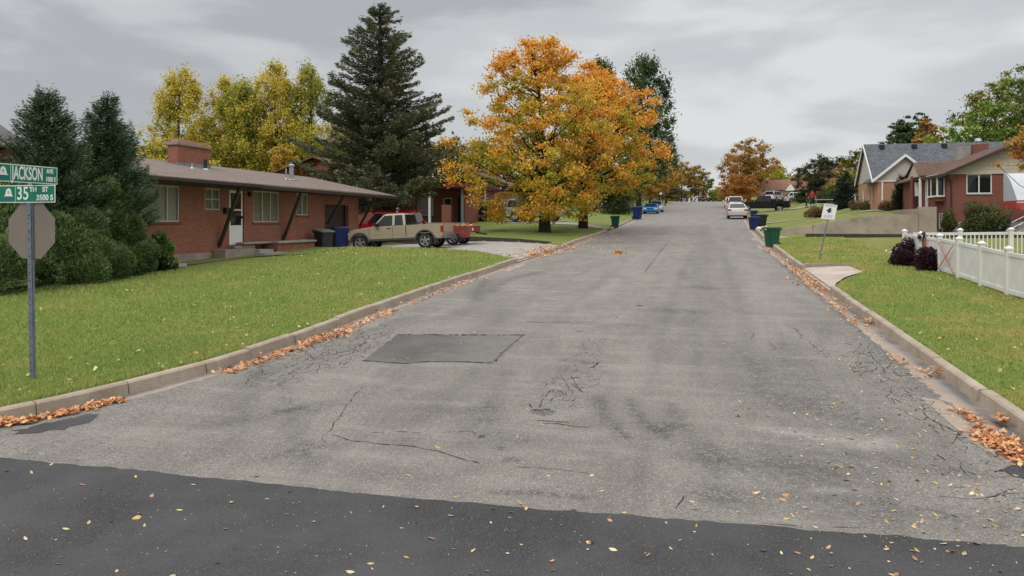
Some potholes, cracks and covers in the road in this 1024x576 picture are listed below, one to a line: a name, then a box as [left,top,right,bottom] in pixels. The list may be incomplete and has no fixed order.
crack [242,319,524,387]
crack [839,341,1016,499]
crack [529,339,608,427]
crack [322,393,478,463]
